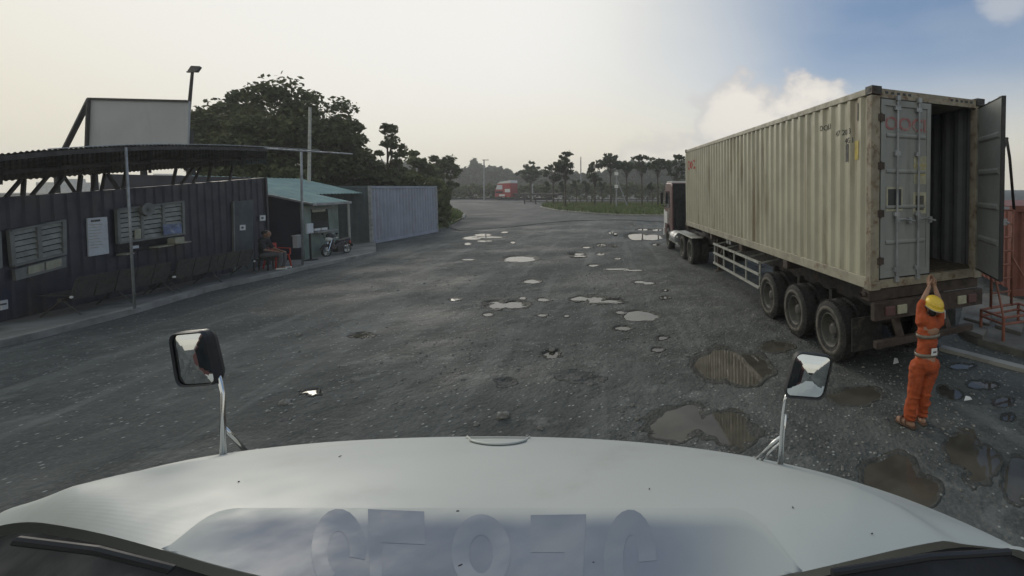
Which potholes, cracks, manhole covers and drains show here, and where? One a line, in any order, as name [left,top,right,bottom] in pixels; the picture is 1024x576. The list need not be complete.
pothole [347,331,377,339]
pothole [493,376,519,389]
pothole [540,348,563,360]
pothole [568,294,628,305]
pothole [497,255,542,263]
pothole [688,344,778,389]
pothole [620,309,663,322]
pothole [481,299,532,311]
pothole [298,388,322,397]
